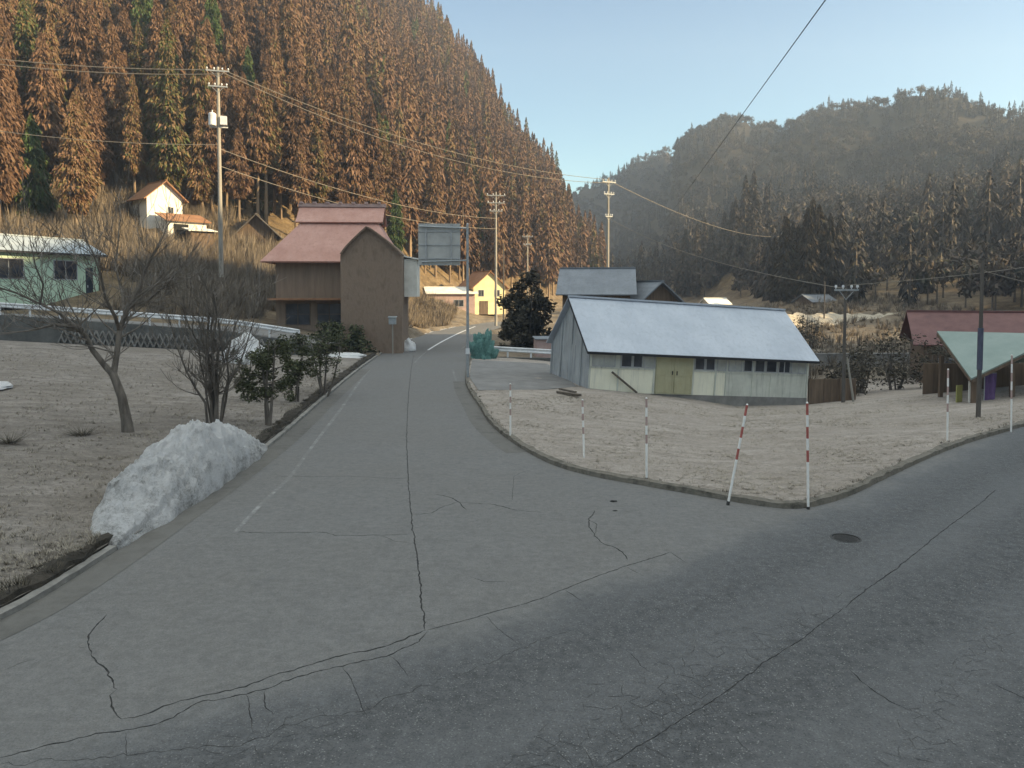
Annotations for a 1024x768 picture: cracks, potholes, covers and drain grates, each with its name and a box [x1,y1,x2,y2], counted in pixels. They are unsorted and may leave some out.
crack [588,511,627,559]
crack [240,531,407,543]
crack [849,616,1015,767]
crack [416,473,531,515]
manhole cover [830,533,862,543]
crack [1,552,685,766]
crack [503,584,864,768]
